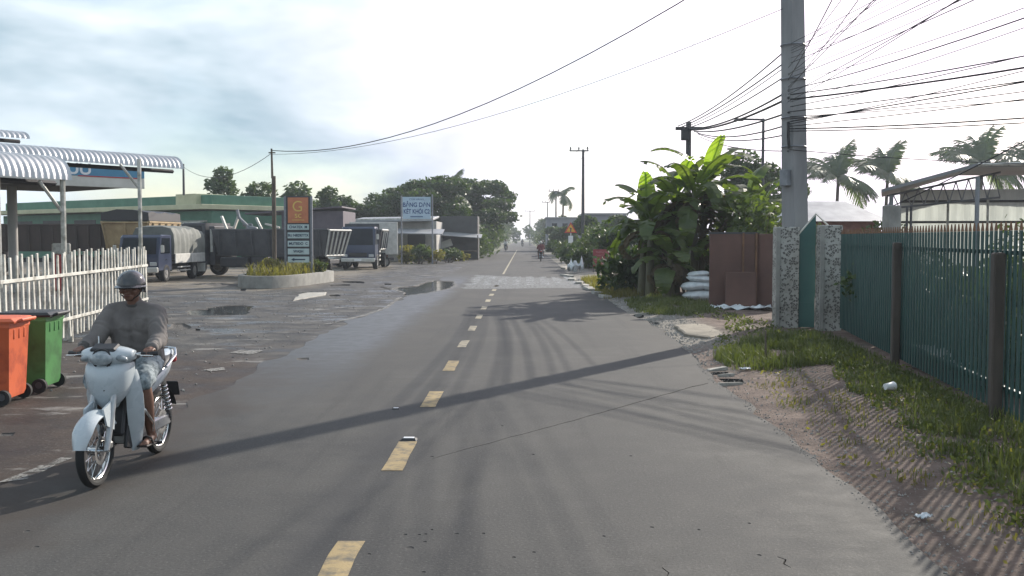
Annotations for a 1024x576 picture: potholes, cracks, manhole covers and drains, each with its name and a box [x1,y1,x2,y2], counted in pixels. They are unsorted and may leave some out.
crack [433,383,707,459]
pothole [185,305,254,315]
pothole [385,280,456,296]
